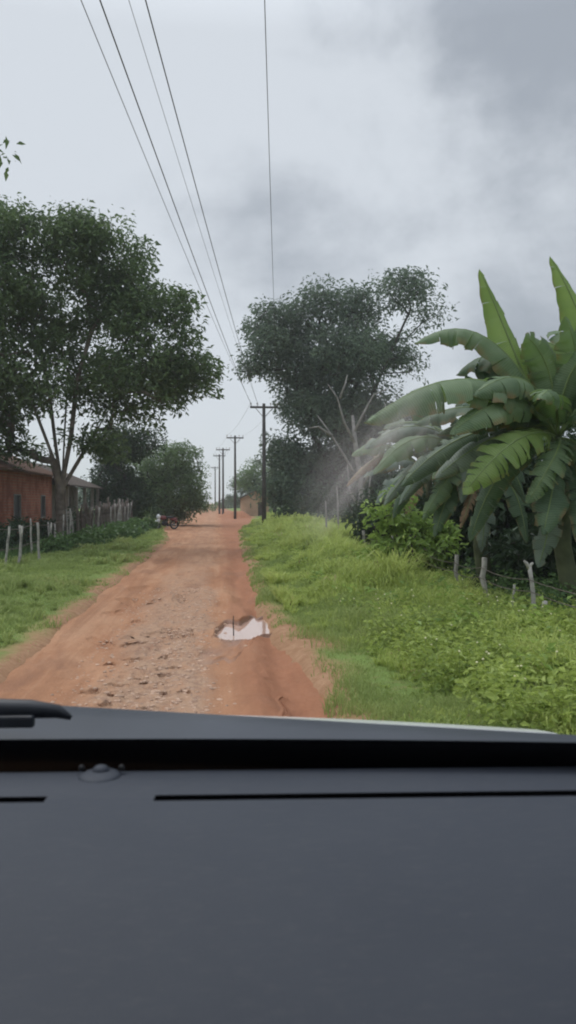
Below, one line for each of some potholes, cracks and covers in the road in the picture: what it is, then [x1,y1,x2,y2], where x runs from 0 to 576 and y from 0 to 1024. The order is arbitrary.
pothole [112,639,156,650]
pothole [114,633,149,643]
pothole [193,615,272,664]
